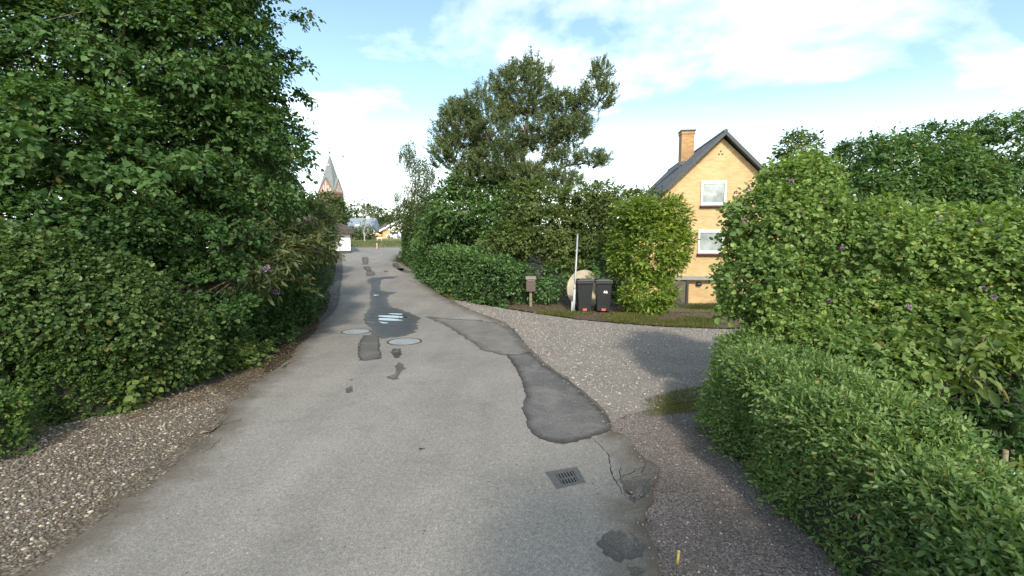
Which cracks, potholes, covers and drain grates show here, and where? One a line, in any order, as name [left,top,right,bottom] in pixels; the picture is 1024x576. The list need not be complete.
crack [592,441,649,498]
drain grate [546,467,586,489]
